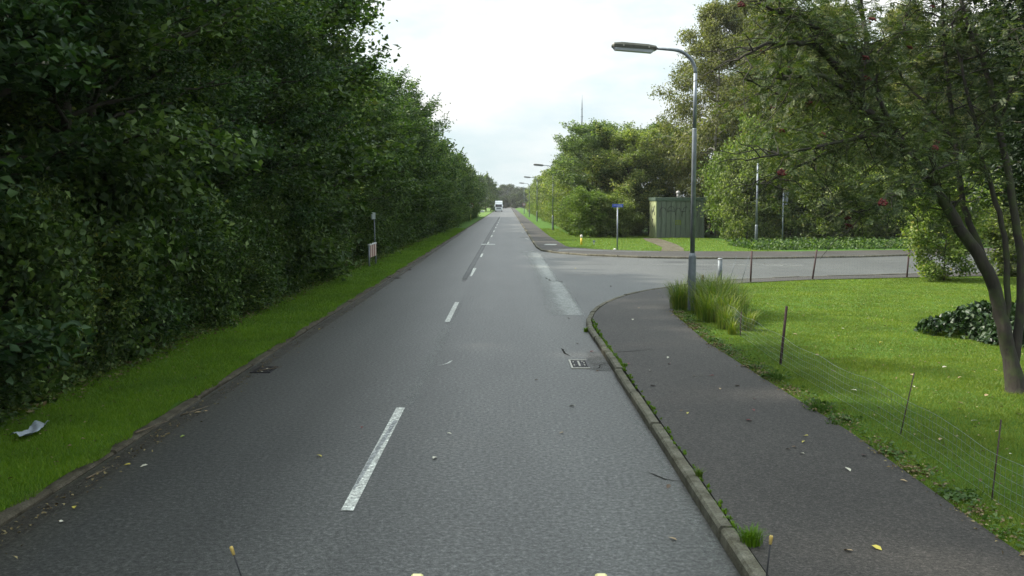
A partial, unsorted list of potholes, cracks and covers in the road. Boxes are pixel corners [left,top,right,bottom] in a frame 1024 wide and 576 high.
drain grate [568,360,590,369]
